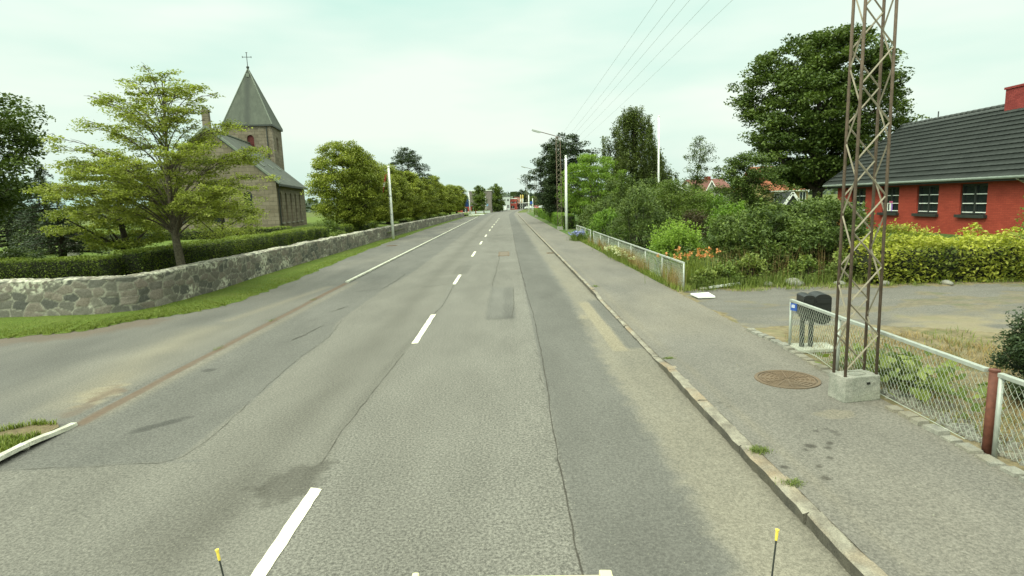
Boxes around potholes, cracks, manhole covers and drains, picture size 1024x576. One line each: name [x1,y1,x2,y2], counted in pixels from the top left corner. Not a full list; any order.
crack [506,288,584,575]
manhole cover [754,370,821,389]
crack [4,275,404,471]
